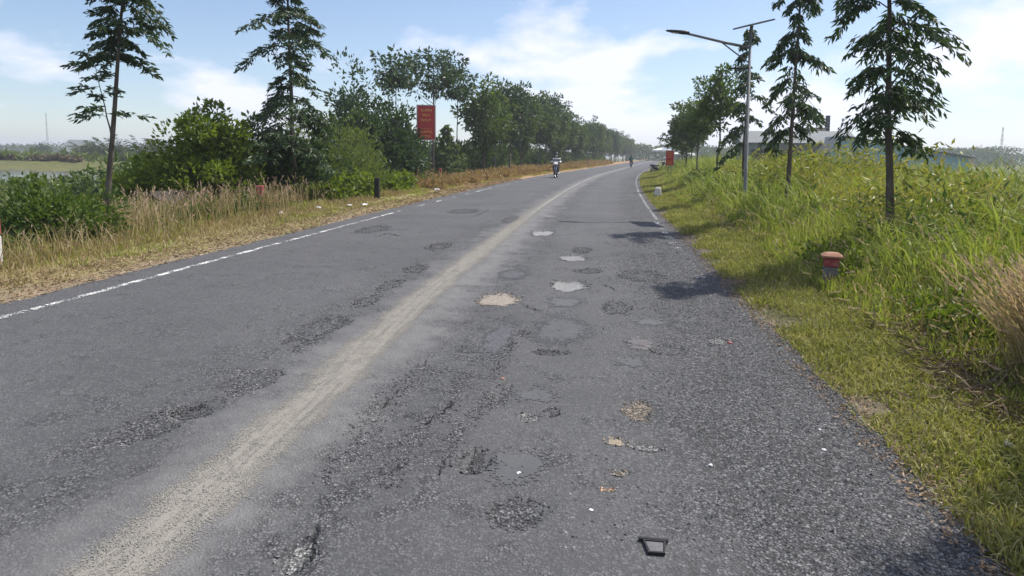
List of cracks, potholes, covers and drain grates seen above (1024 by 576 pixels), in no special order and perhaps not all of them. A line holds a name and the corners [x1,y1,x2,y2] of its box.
crack [301,341,522,570]
pothole [171,403,215,421]
pothole [424,242,454,250]
pothole [479,495,554,533]
pothole [620,400,654,422]
pothole [282,314,353,347]
pothole [272,534,321,576]
pothole [110,411,186,445]
pothole [459,446,494,473]
pothole [599,301,633,316]
